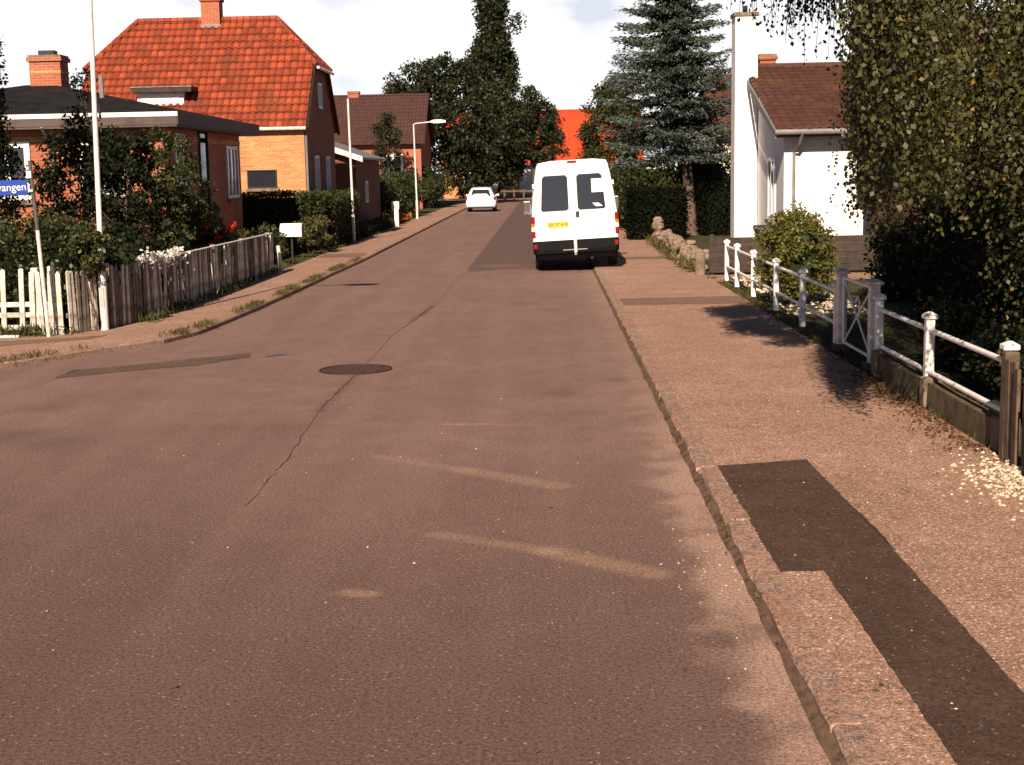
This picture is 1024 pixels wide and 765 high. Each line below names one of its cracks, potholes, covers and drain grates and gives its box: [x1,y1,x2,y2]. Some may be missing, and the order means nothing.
crack [246,307,432,505]
manhole cover [319,364,393,375]
